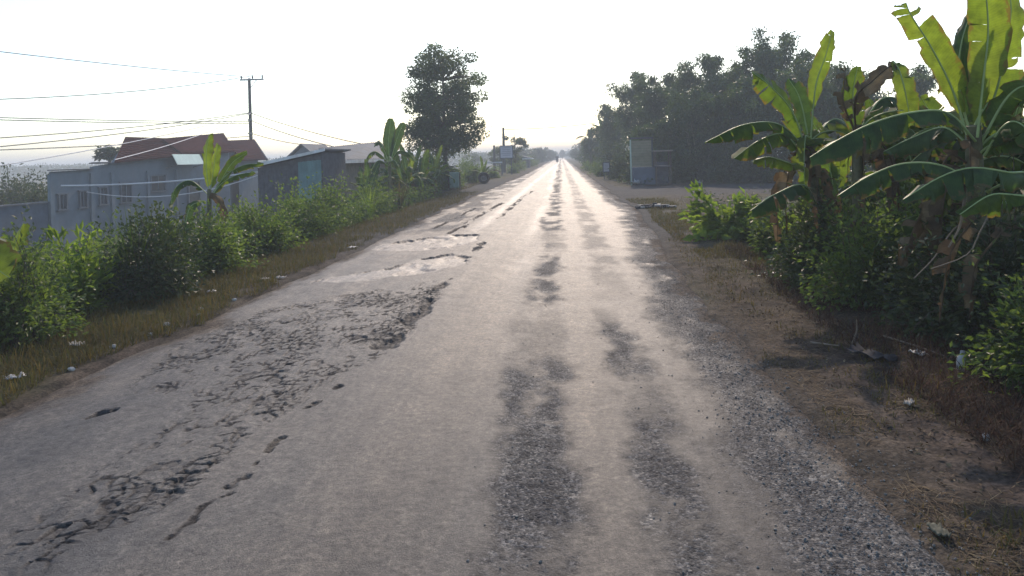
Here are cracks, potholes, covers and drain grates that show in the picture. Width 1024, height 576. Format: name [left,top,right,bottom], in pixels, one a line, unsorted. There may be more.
pothole [365,332,414,351]
crack [0,279,452,576]
pothole [371,234,482,251]
pothole [83,404,125,420]
pothole [307,252,473,283]
